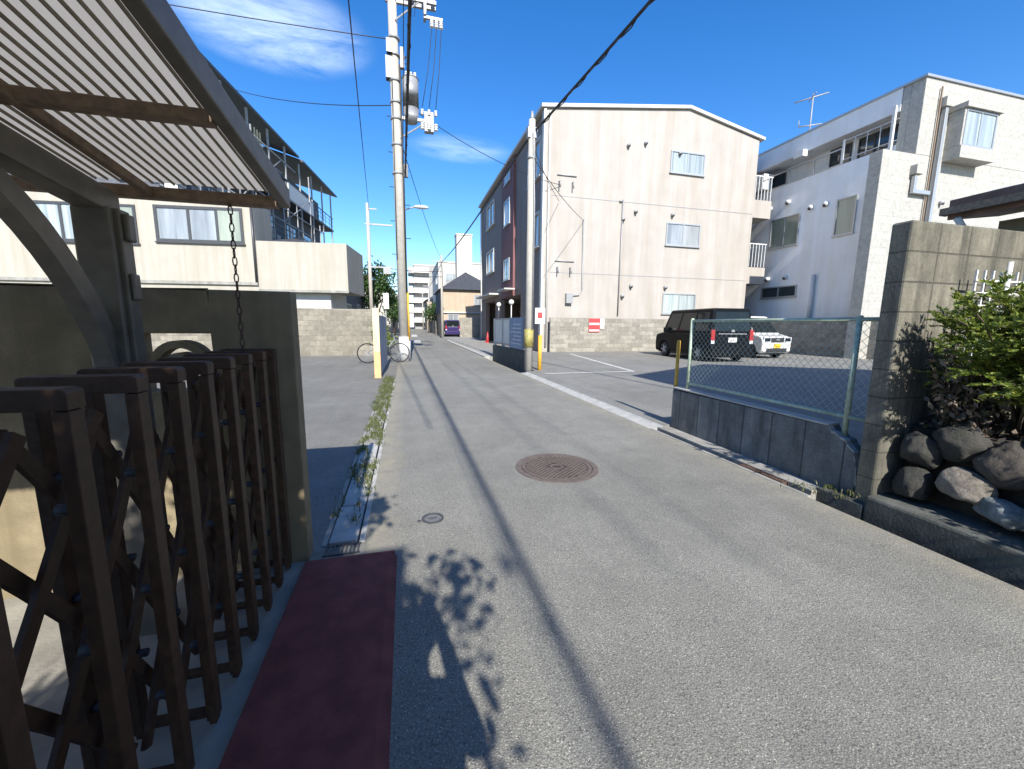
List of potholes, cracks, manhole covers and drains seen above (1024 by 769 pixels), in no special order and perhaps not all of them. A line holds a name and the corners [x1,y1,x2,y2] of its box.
drain grate [322,542,362,558]
drain grate [738,463,789,485]
manhole cover [516,453,598,483]
utility cover [417,513,444,524]
